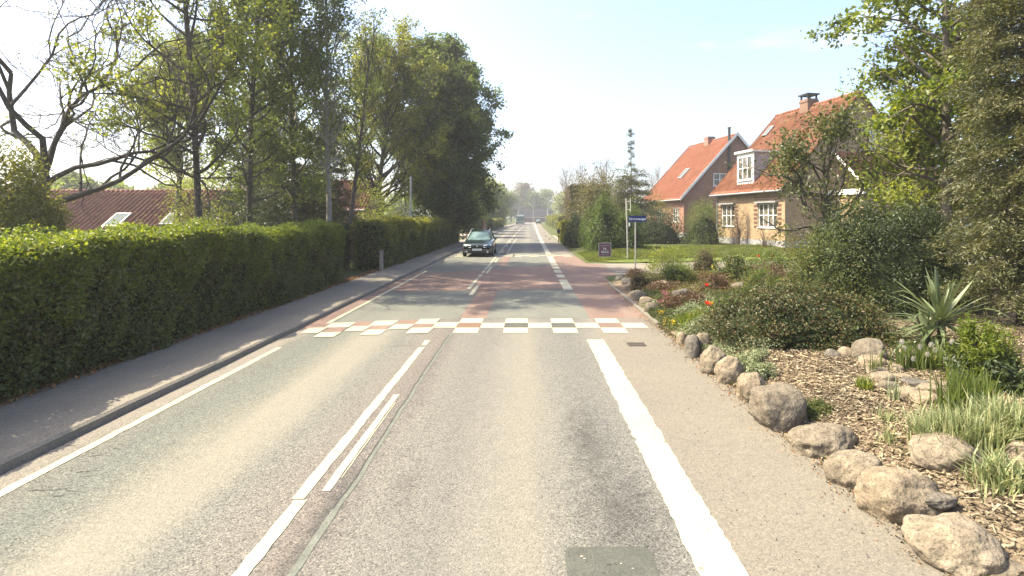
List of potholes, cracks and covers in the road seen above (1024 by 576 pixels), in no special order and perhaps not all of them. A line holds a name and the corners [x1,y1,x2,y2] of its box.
crack [30,448,117,496]
manhole cover [564,546,660,576]
